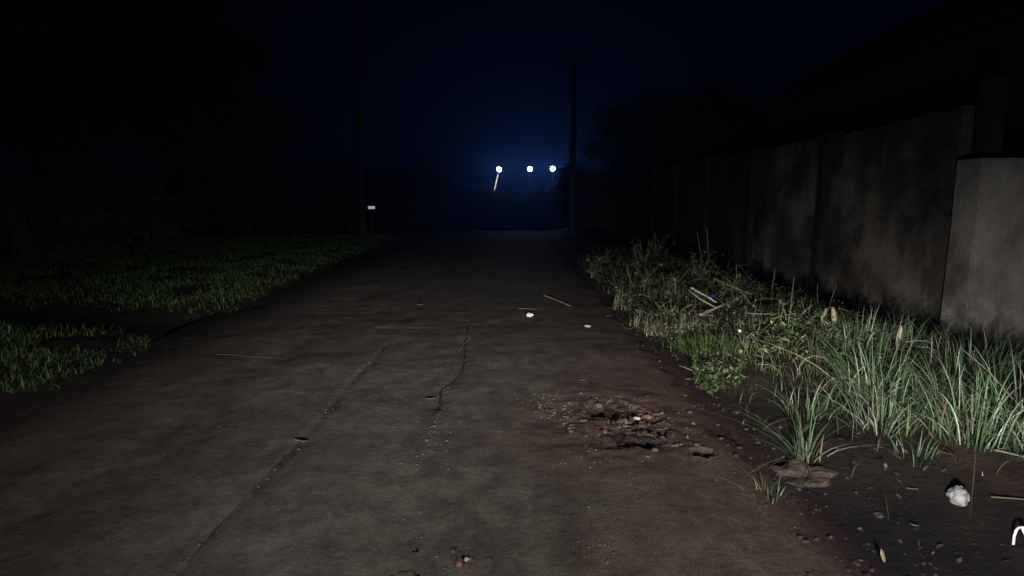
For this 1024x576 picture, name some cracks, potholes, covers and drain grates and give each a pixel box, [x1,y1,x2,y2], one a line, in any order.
crack [173,344,388,576]
pothole [577,396,675,457]
crack [428,325,472,418]
pothole [686,446,719,460]
